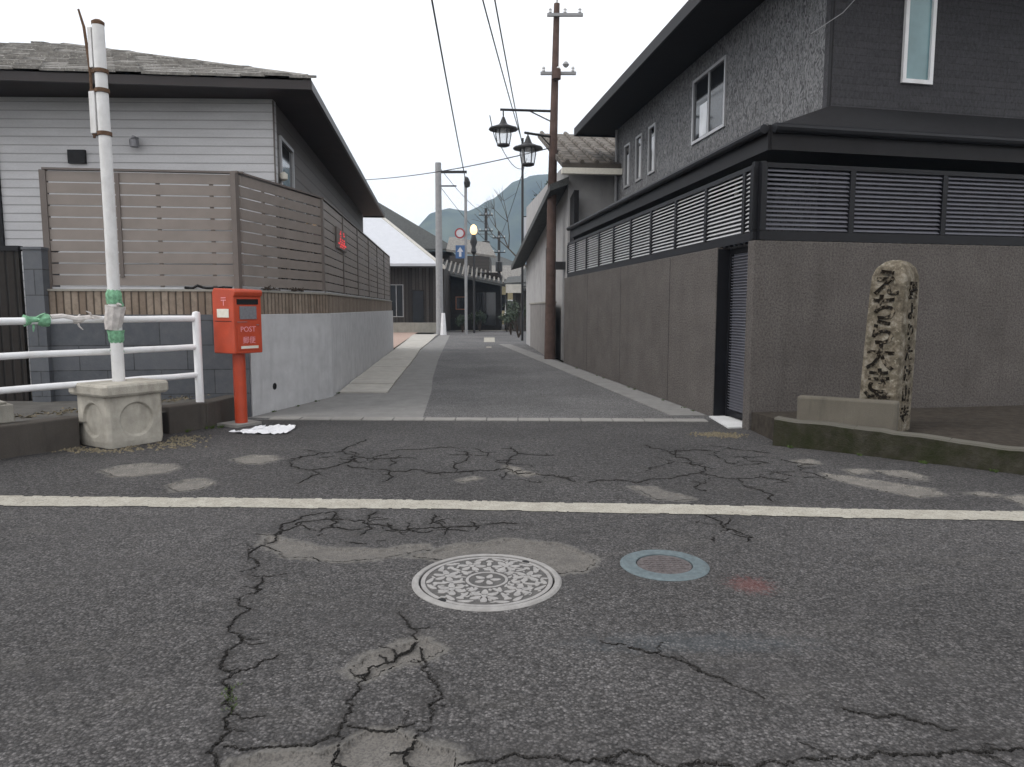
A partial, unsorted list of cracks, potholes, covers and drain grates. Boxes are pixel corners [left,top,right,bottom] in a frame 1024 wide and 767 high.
crack [284,439,576,484]
manhole cover [412,554,562,612]
crack [696,515,752,542]
manhole cover [620,550,710,581]
crack [589,445,828,502]
crack [600,639,765,699]
crack [205,511,518,767]
